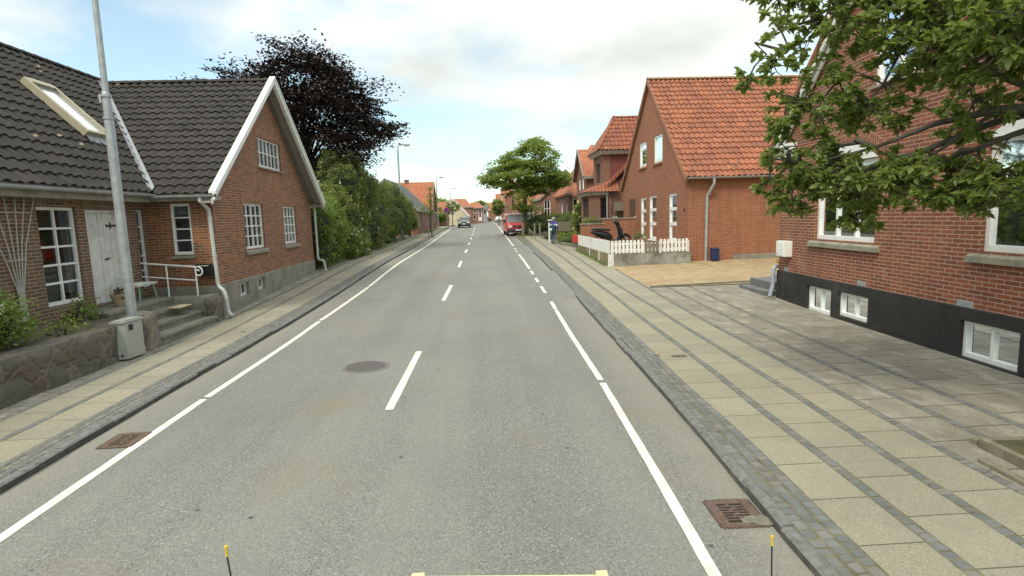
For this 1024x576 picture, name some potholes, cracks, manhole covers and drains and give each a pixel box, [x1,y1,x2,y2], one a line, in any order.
manhole cover [341,360,390,373]
drain grate [702,498,773,529]
drain grate [95,431,152,449]
